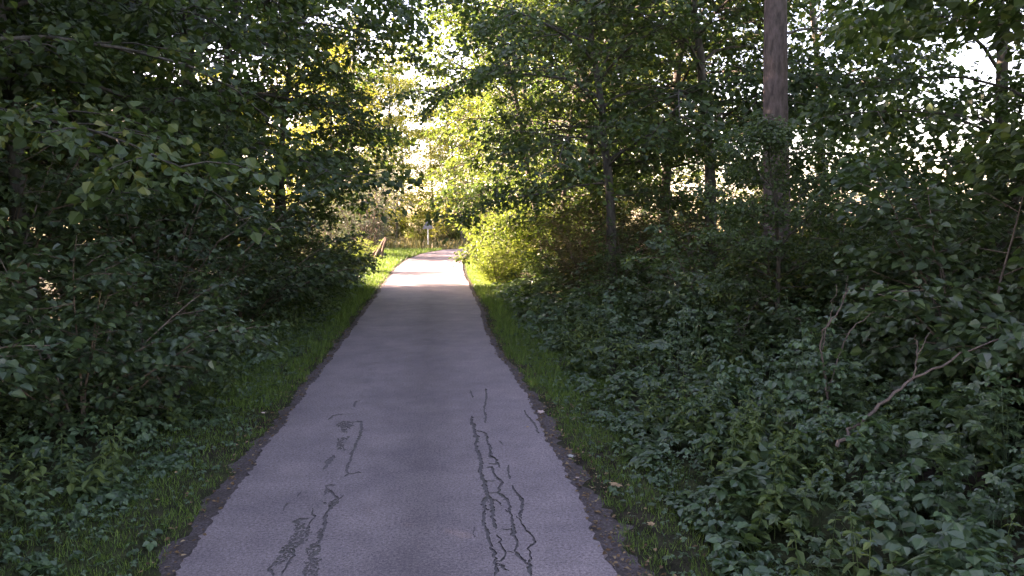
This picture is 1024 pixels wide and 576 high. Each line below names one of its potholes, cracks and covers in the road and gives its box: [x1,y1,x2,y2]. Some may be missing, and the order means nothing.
crack [469,388,539,576]
crack [266,400,363,576]
